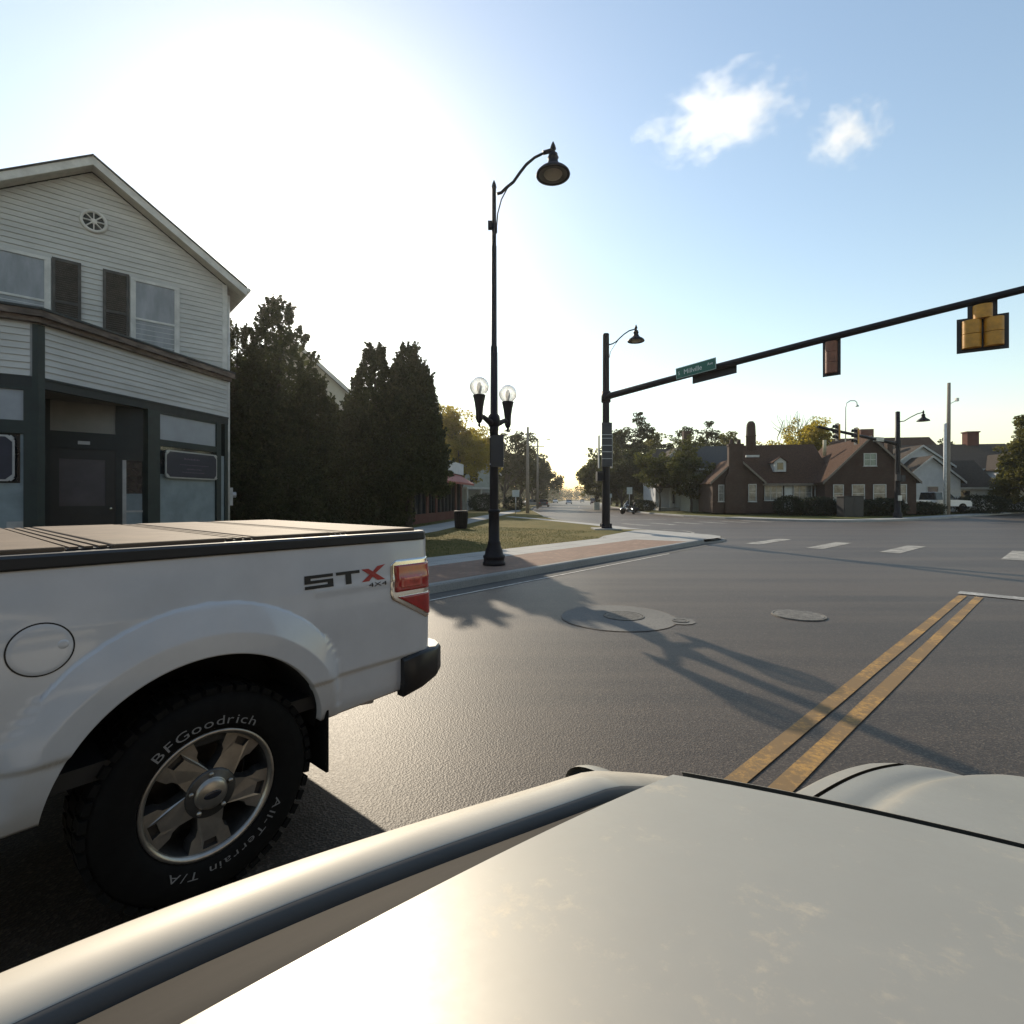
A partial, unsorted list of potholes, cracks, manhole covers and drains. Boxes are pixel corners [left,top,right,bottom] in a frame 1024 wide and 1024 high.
manhole cover [771,609,828,622]
manhole cover [561,605,675,632]
